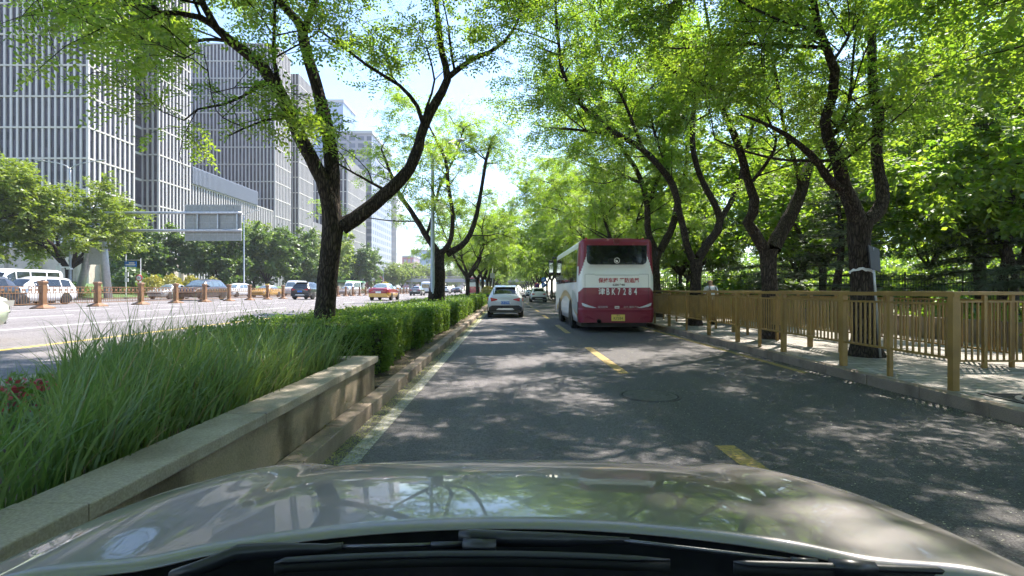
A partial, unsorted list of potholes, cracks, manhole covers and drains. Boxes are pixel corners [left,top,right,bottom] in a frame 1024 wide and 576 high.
manhole cover [619,390,682,402]
